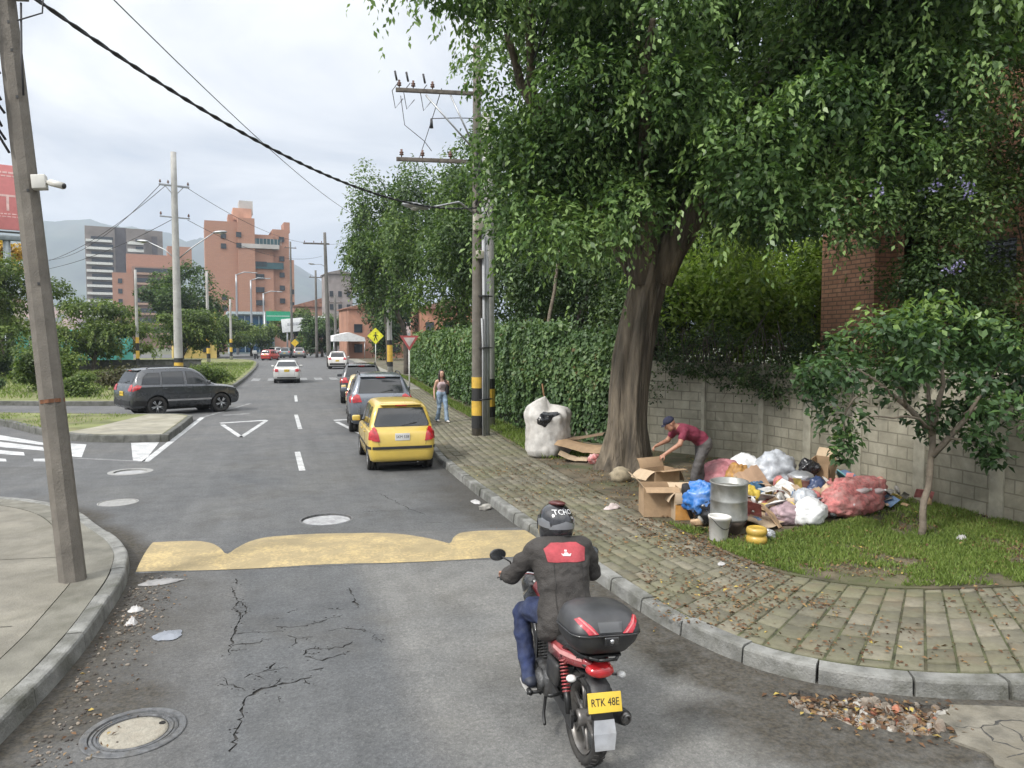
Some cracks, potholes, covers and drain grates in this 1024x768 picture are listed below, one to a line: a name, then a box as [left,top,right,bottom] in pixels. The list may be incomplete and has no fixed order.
crack [217,579,384,752]
crack [956,719,1024,757]
manhole cover [78,707,187,759]
manhole cover [299,513,353,526]
manhole cover [97,498,139,507]
